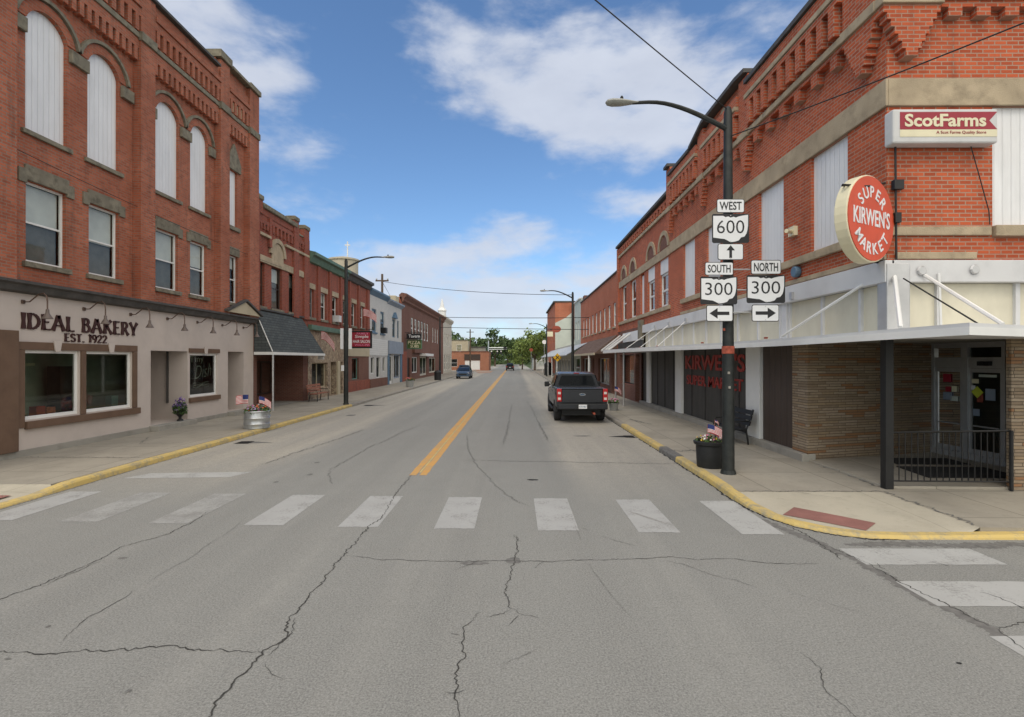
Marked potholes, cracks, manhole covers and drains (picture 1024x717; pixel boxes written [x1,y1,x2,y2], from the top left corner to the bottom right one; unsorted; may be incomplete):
crack [3,476,867,717]
crack [503,402,548,444]
